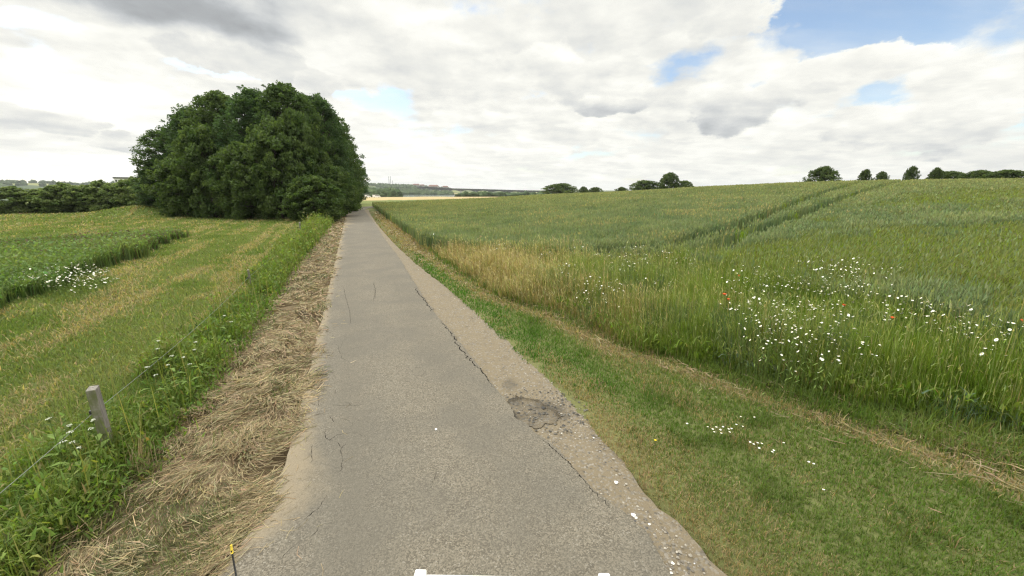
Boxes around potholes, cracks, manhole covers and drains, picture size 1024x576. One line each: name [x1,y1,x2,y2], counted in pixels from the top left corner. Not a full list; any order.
crack [543,440,615,512]
crack [415,289,490,383]
pothole [507,395,561,429]
